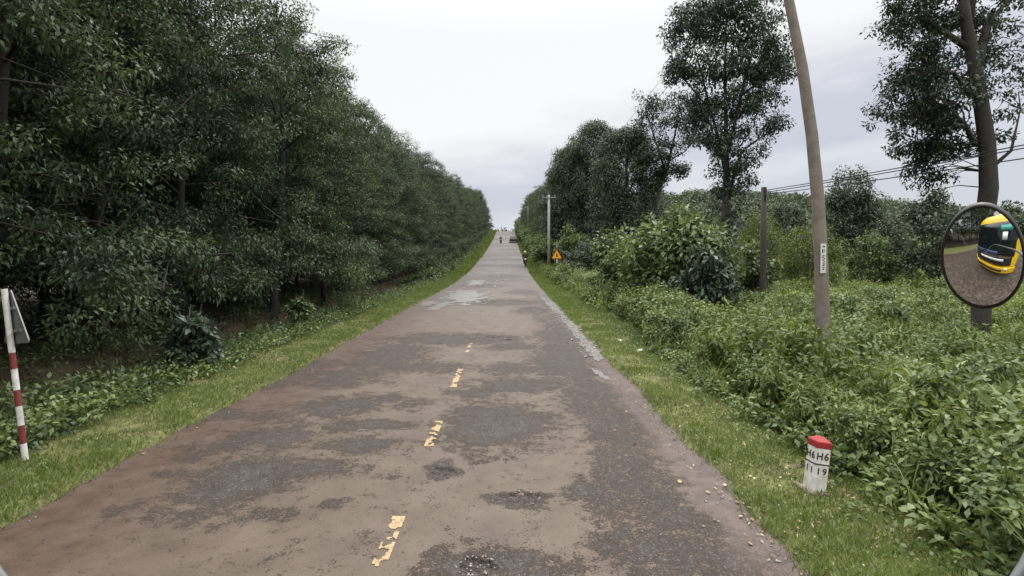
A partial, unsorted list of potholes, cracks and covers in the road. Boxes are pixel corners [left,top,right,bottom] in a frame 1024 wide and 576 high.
pothole [488,489,554,510]
pothole [448,551,509,576]
pothole [425,465,466,482]
